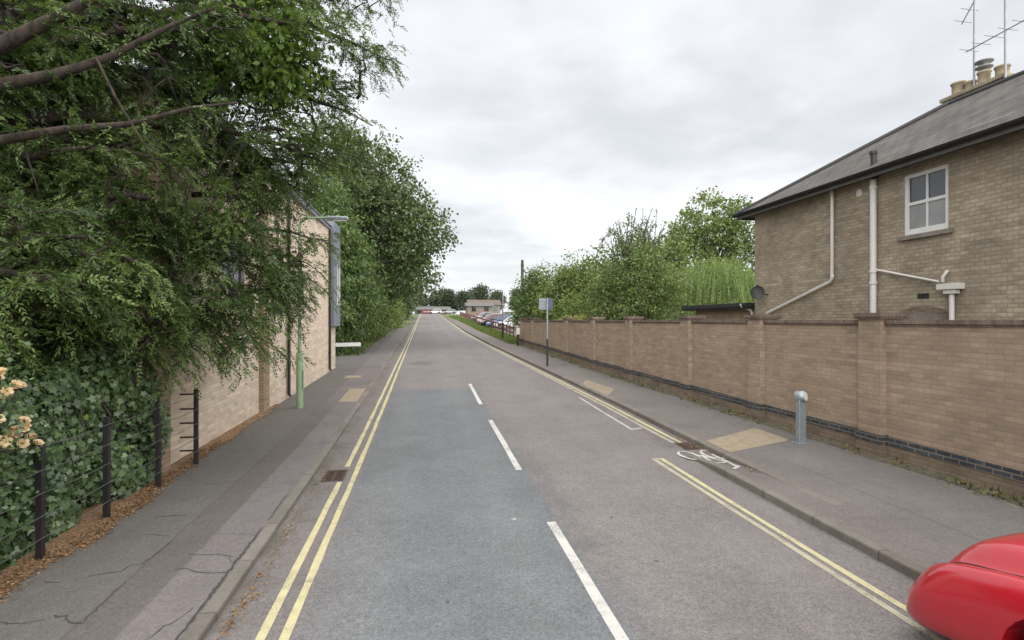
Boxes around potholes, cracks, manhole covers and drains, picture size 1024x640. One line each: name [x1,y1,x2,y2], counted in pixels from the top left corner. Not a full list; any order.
drain grate [321,469,348,481]
drain grate [674,442,701,450]
